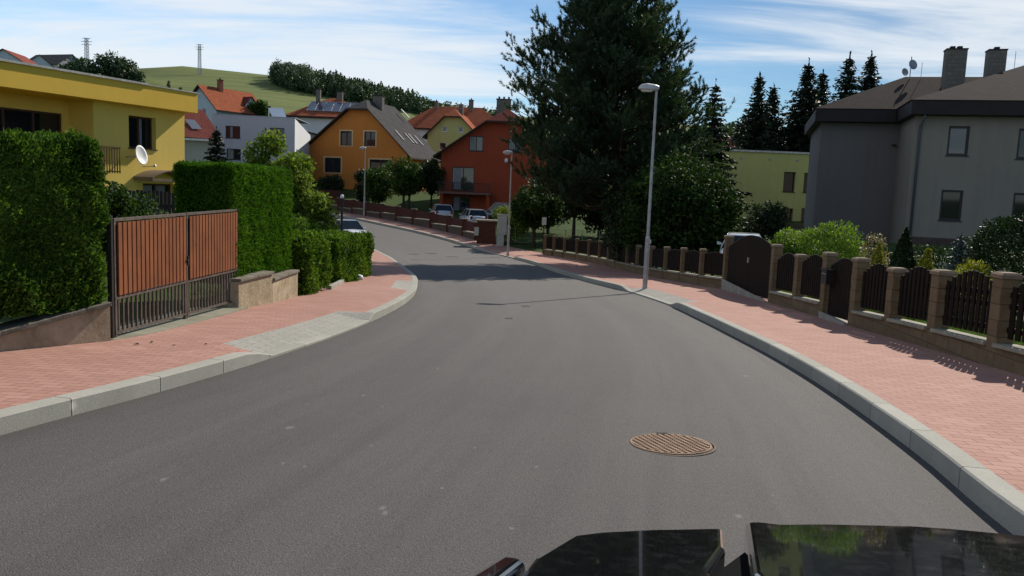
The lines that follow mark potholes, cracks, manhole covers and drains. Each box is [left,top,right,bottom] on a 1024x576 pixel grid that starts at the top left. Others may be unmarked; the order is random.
manhole cover [627,432,716,457]
